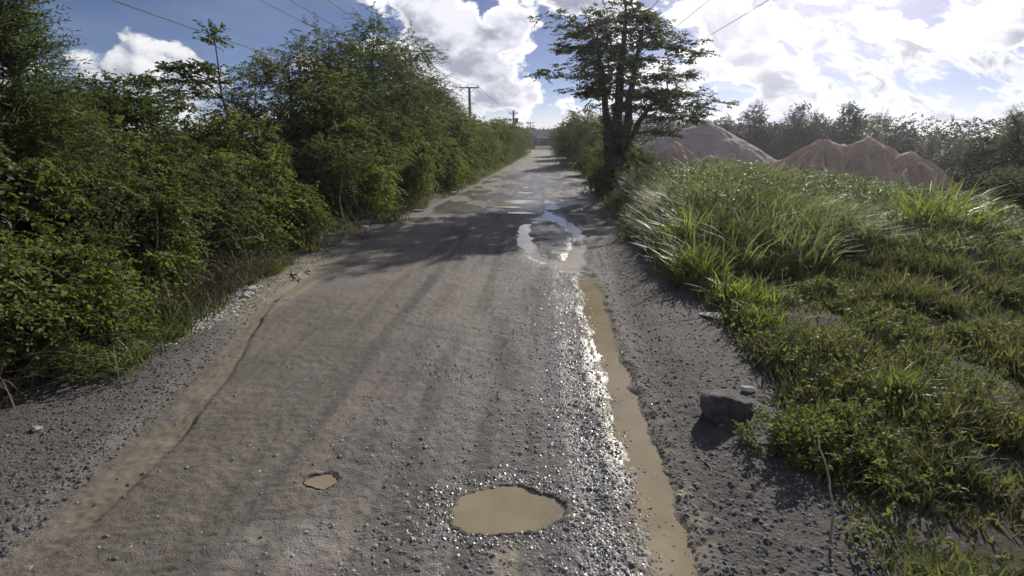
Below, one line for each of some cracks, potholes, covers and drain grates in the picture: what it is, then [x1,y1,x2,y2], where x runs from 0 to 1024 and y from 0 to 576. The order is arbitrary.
pothole [447,483,573,537]
pothole [303,472,340,491]
